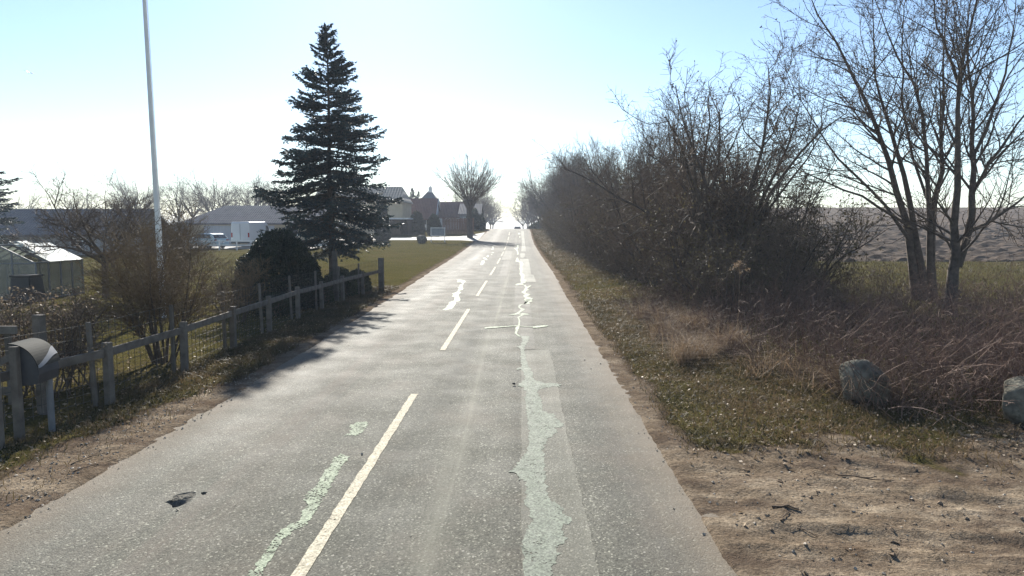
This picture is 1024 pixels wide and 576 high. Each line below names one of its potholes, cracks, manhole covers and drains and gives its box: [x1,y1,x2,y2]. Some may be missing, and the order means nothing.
pothole [165,492,196,508]
